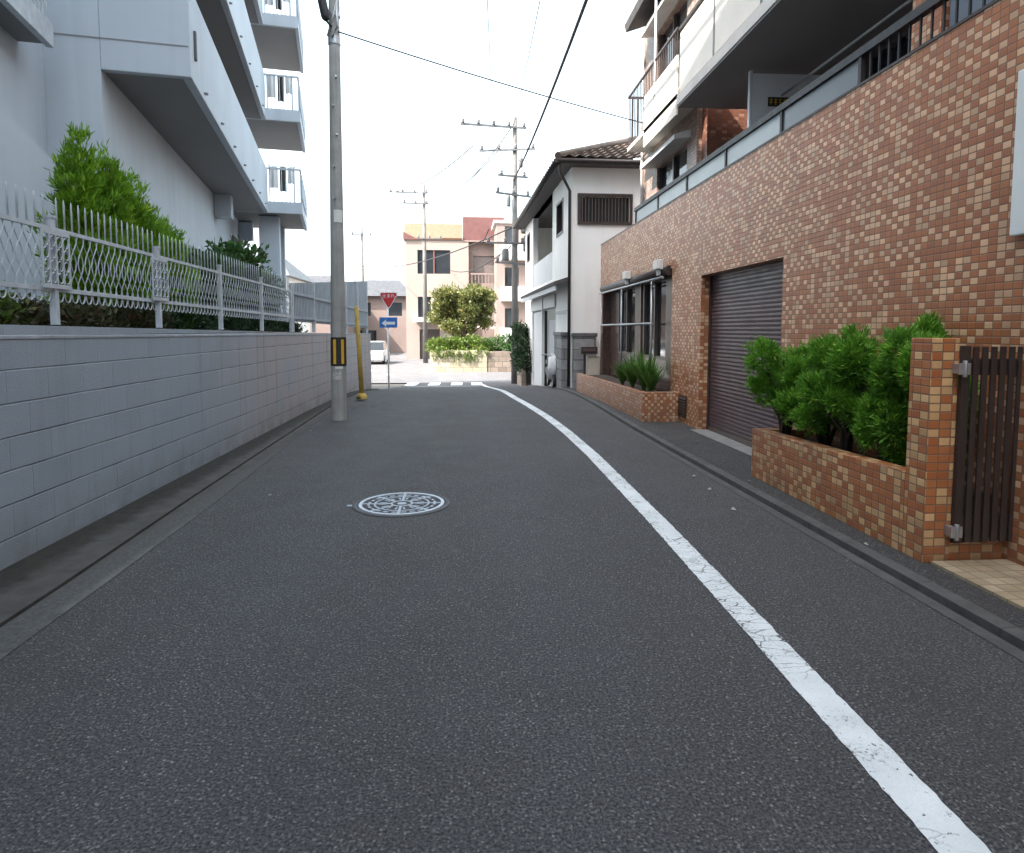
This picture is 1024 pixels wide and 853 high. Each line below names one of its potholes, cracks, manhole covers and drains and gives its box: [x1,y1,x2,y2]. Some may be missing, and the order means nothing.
manhole cover [347,492,450,517]
